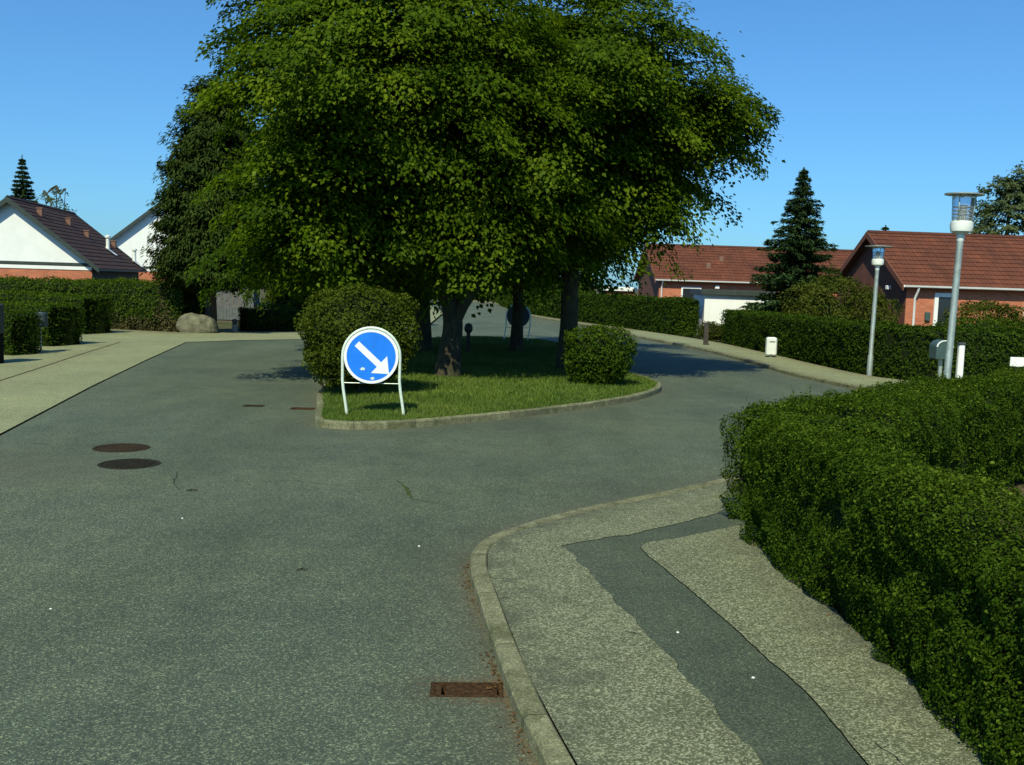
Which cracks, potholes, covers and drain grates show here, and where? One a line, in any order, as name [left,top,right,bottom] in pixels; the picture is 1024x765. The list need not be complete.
manhole cover [97,458,161,470]
drain grate [430,682,504,698]
manhole cover [92,443,151,453]
crack [398,481,438,504]
